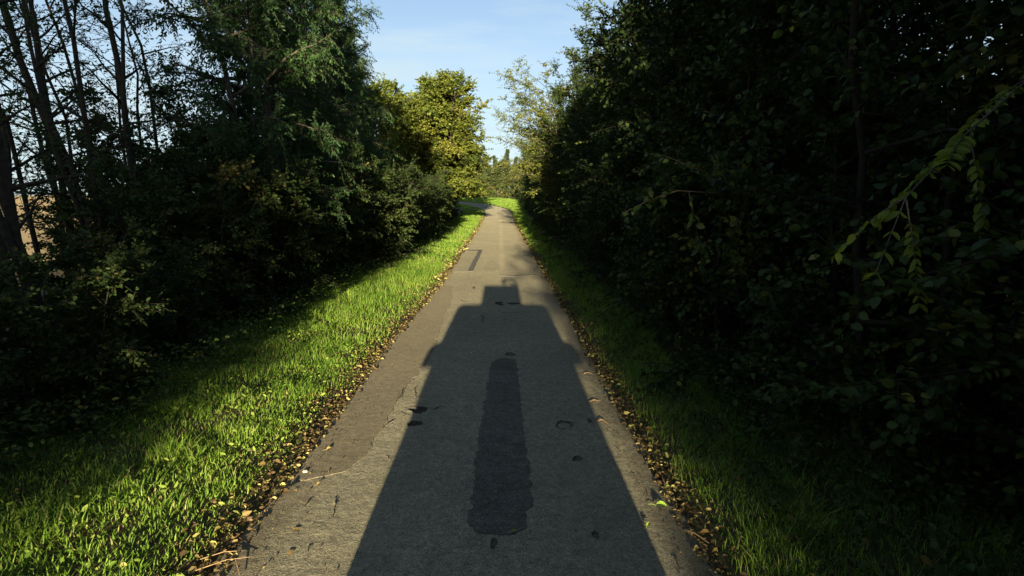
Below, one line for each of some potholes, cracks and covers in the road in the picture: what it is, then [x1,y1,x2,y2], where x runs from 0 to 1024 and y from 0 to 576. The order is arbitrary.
pothole [550,418,580,432]
pothole [402,405,433,417]
